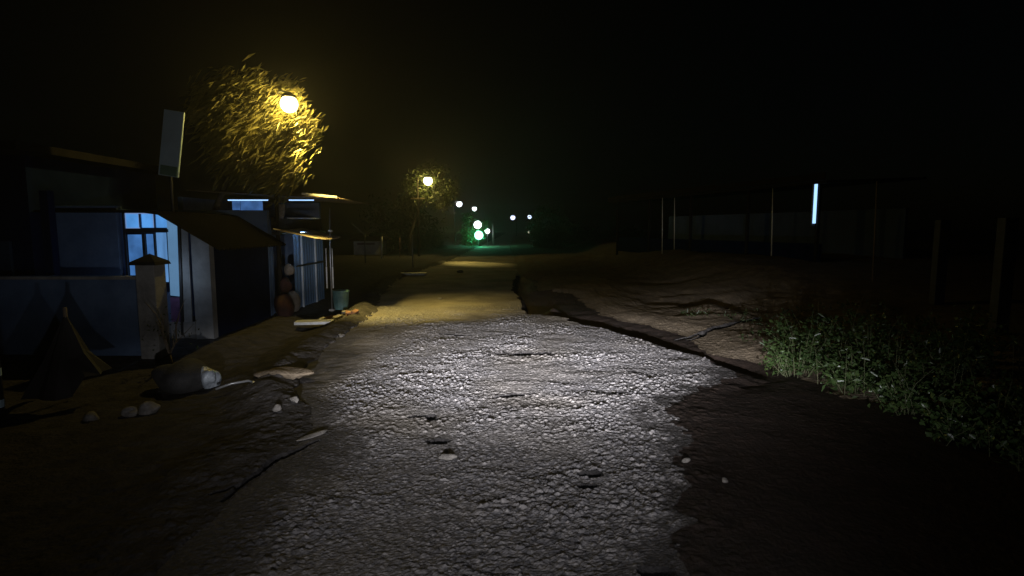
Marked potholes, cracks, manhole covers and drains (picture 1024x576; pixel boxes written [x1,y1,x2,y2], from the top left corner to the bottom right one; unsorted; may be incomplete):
crack [674,317,760,341]
pothole [577,470,604,478]
pothole [407,414,439,422]
crack [208,439,321,503]
